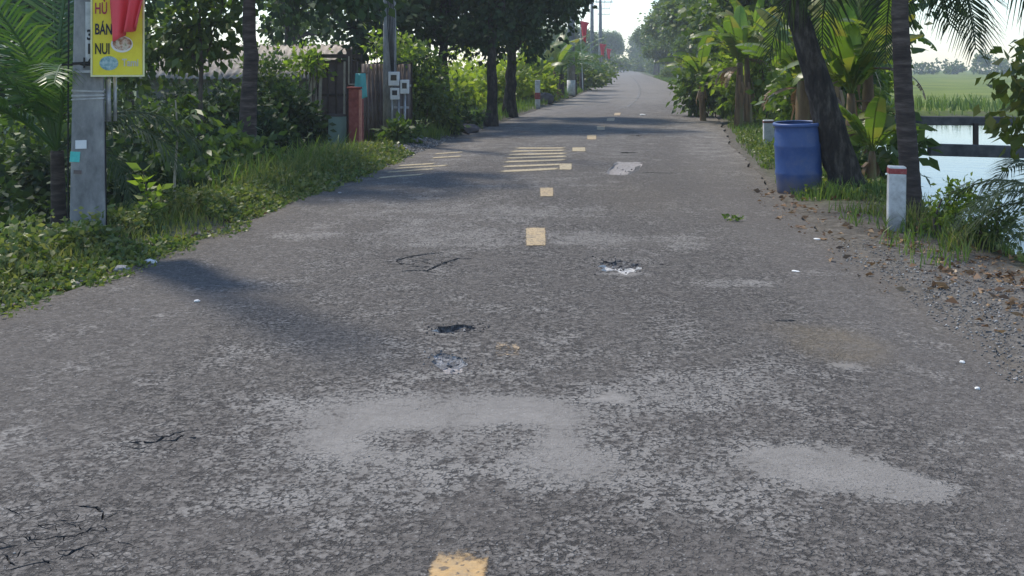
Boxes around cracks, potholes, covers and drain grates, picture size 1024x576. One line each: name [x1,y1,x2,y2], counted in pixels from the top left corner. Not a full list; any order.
crack [0,504,136,574]
pothole [425,322,490,336]
crack [387,252,471,273]
crack [112,430,204,452]
pothole [423,345,483,381]
pothole [584,256,654,275]
